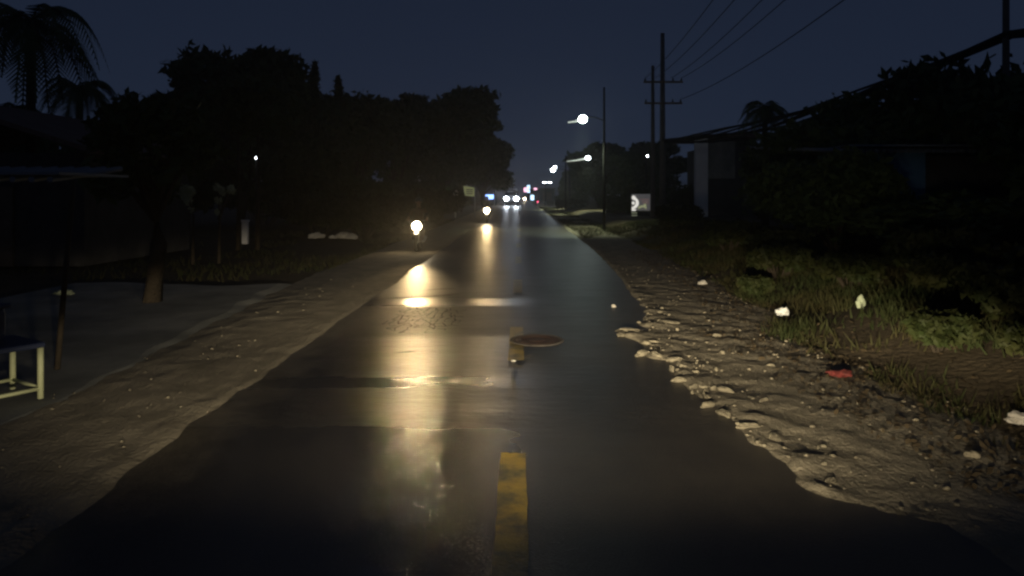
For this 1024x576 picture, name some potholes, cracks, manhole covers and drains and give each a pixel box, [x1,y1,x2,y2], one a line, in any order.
manhole cover [510,334,564,346]
crack [383,288,465,333]
